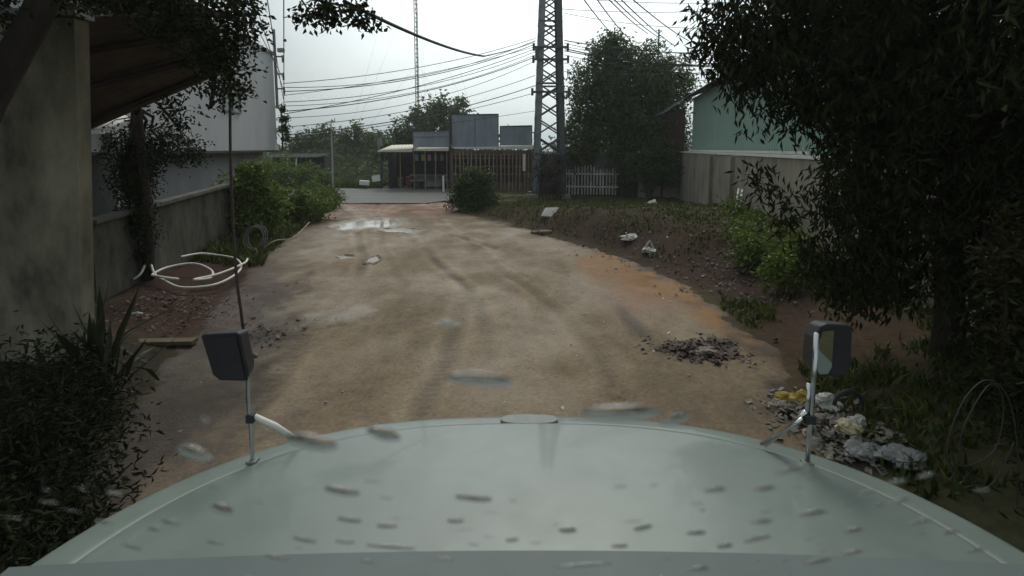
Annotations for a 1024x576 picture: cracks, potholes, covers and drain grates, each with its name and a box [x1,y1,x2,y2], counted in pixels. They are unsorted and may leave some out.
pothole [362,255,382,265]
pothole [323,217,403,232]
